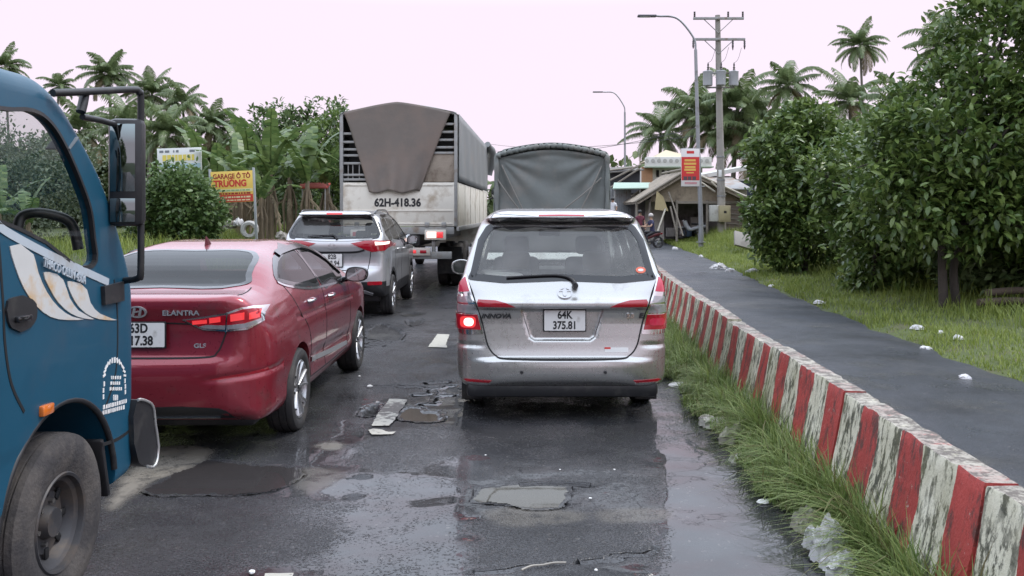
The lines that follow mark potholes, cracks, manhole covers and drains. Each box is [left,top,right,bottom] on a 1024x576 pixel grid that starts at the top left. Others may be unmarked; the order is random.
crack [364,340,402,348]
pothole [470,483,573,510]
pothole [396,406,447,423]
crack [578,547,659,565]
crack [475,560,550,575]
